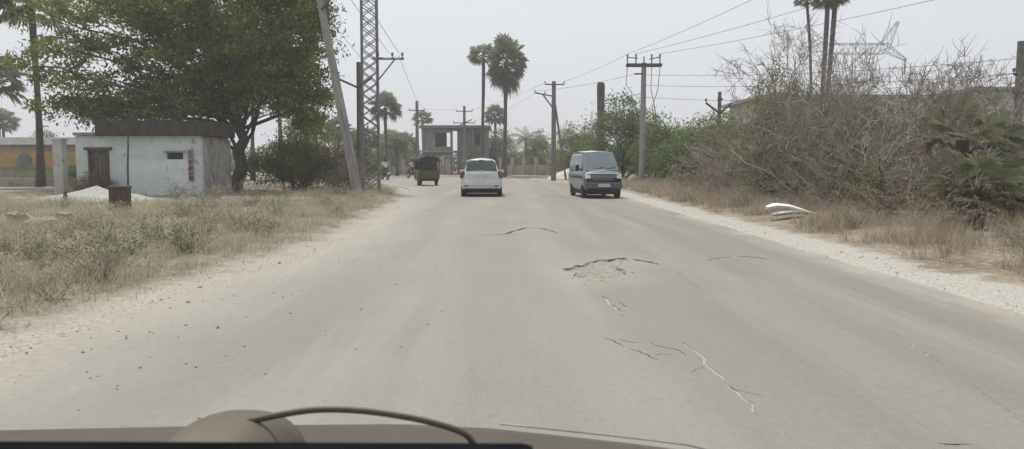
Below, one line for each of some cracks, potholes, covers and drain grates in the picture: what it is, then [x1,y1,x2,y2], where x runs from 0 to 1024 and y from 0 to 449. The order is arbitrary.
crack [602,296,628,317]
pothole [563,257,627,283]
crack [875,323,1016,418]
